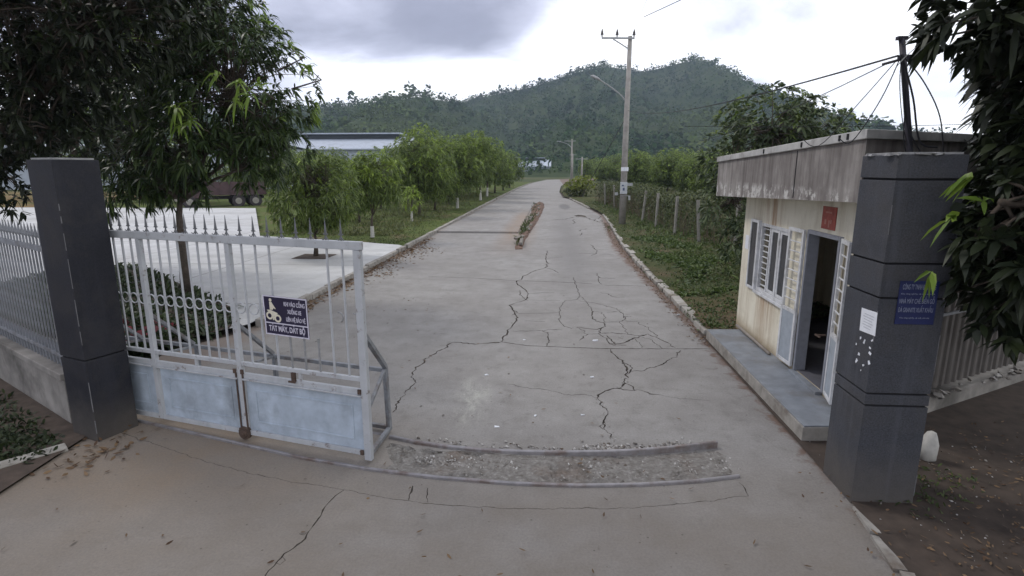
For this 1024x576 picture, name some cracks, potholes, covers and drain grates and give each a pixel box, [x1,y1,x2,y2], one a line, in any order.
crack [512,274,709,437]
crack [393,252,557,412]
crack [126,434,748,509]
crack [265,490,344,576]
